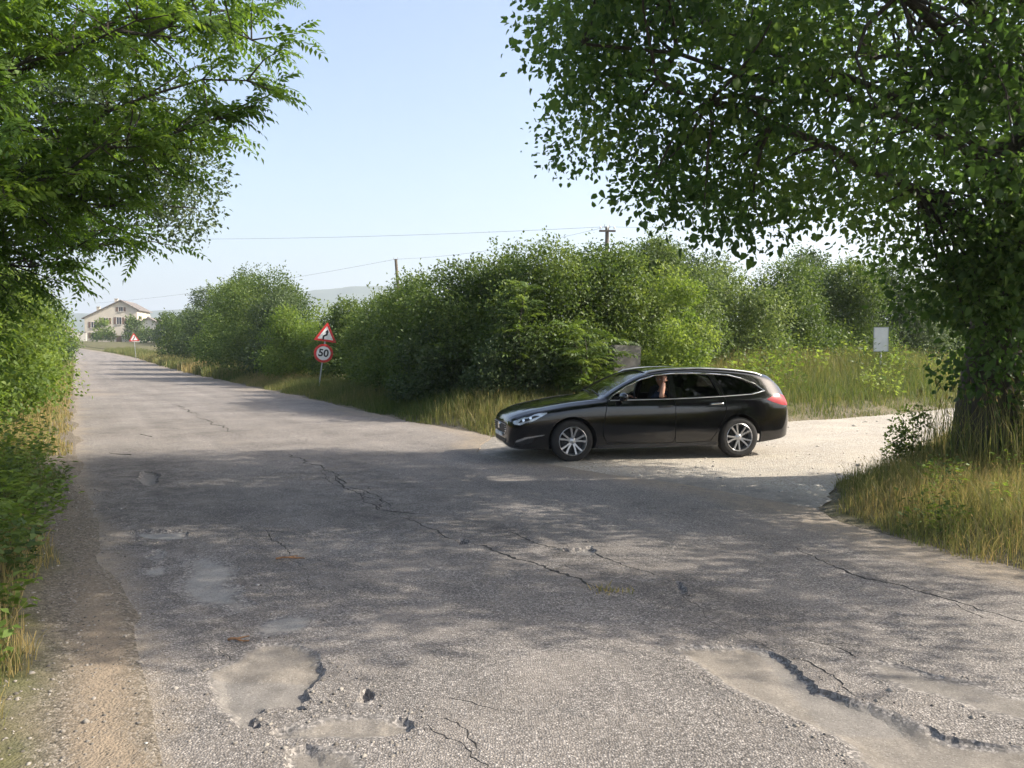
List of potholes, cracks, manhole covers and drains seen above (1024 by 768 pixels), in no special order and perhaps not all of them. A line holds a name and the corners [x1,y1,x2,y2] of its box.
pothole [131,529,191,540]
pothole [136,471,161,486]
crack [799,639,864,696]
crack [266,530,325,601]
pothole [354,688,376,711]
crack [795,547,1024,622]
crack [427,697,496,768]
crack [289,454,780,655]
